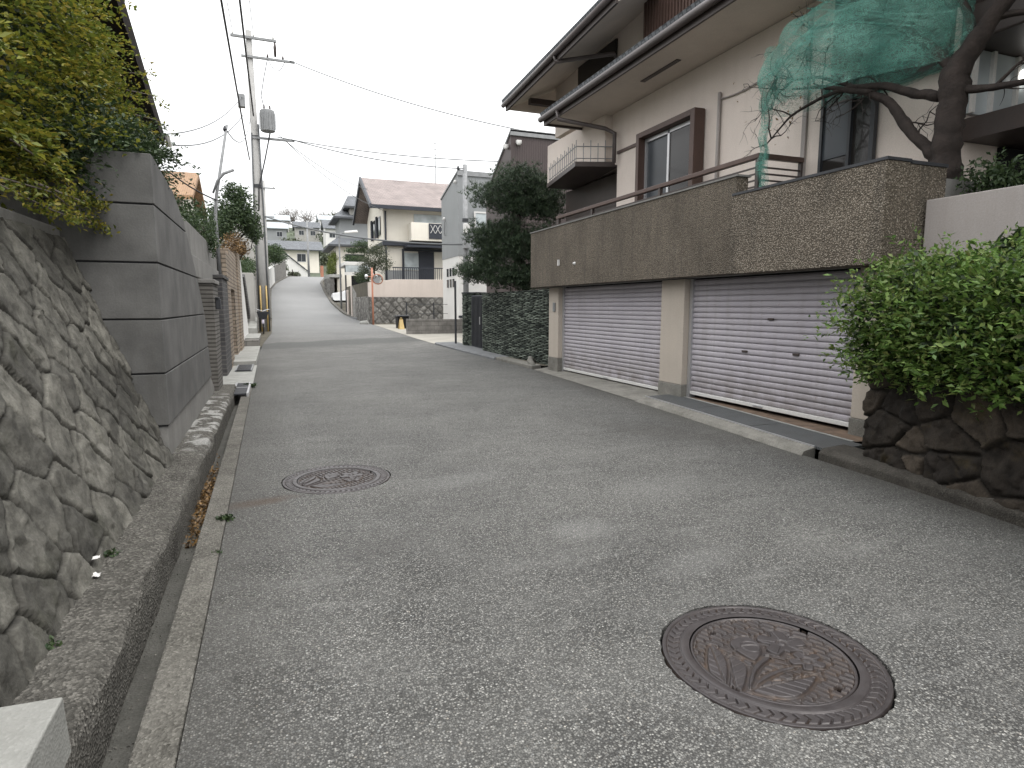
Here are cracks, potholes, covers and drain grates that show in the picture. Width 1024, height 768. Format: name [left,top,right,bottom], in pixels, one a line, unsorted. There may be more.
manhole cover [661,606,894,731]
manhole cover [282,465,390,494]
